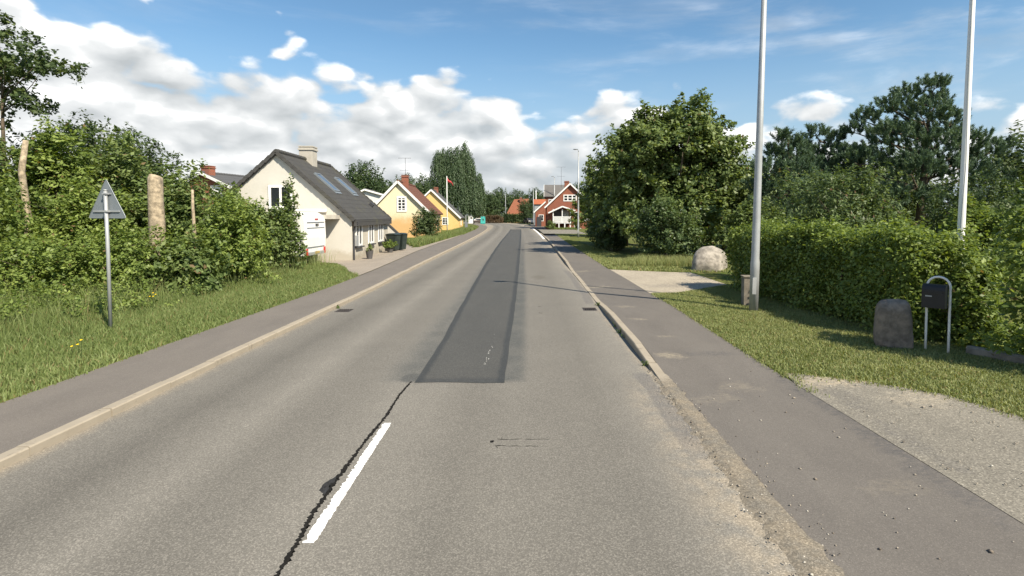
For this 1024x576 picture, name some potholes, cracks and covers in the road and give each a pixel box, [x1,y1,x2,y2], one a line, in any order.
crack [273,381,412,576]
